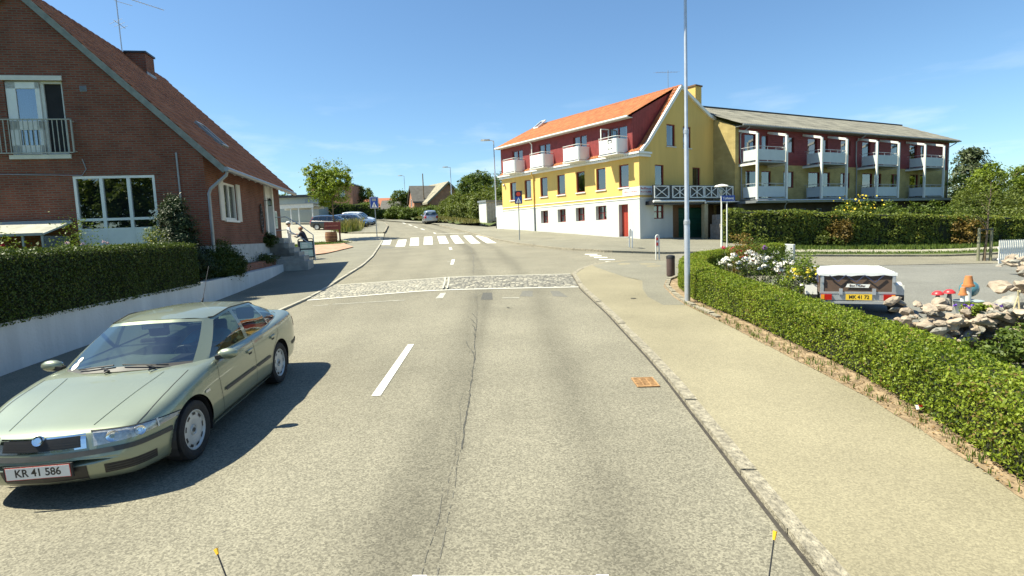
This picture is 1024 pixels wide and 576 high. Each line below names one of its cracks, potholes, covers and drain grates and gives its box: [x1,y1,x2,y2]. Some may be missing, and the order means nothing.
drain grate [631,377,660,388]
crack [421,291,478,576]
